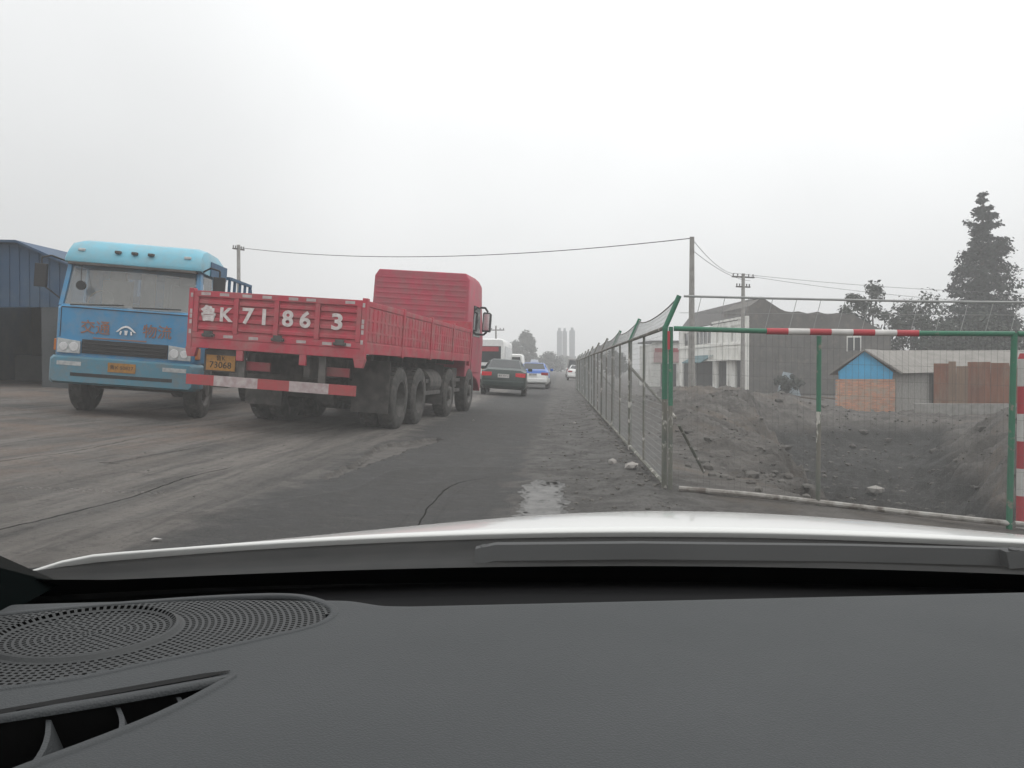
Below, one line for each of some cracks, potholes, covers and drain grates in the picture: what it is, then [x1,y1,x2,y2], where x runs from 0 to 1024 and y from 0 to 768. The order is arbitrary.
crack [401,475,504,527]
pothole [505,478,577,518]
